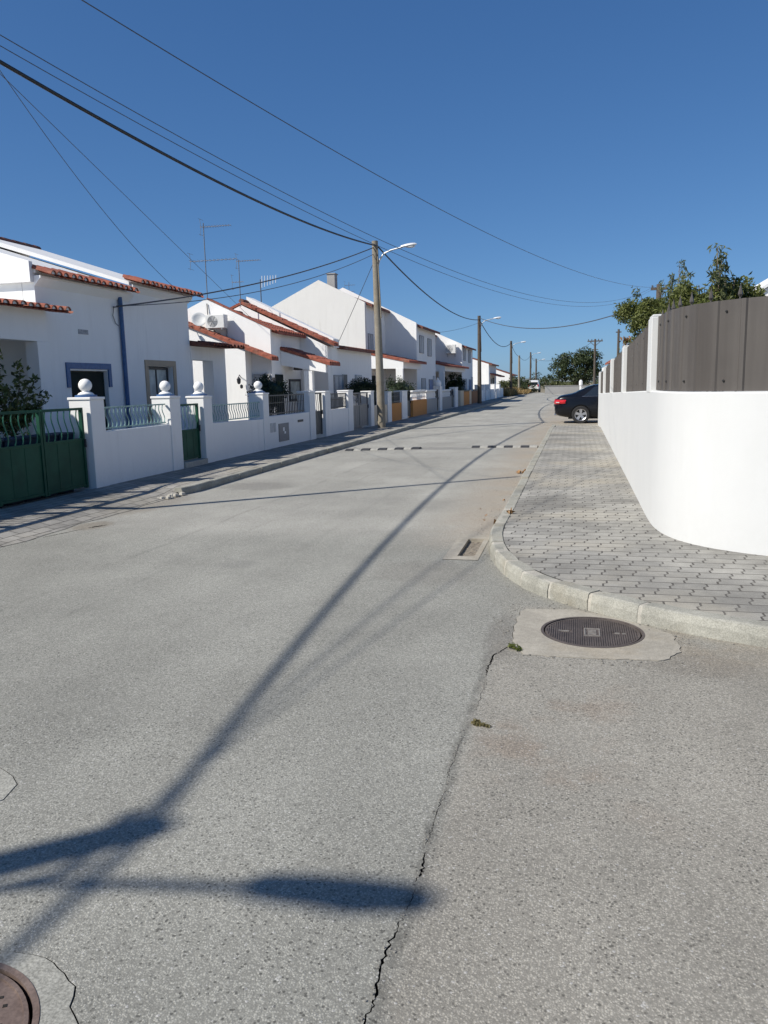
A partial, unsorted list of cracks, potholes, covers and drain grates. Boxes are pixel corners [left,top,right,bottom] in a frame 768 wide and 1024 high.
manhole cover [0,952,77,1024]
manhole cover [512,609,681,661]
crack [358,647,507,1024]
drain grate [443,535,489,560]
